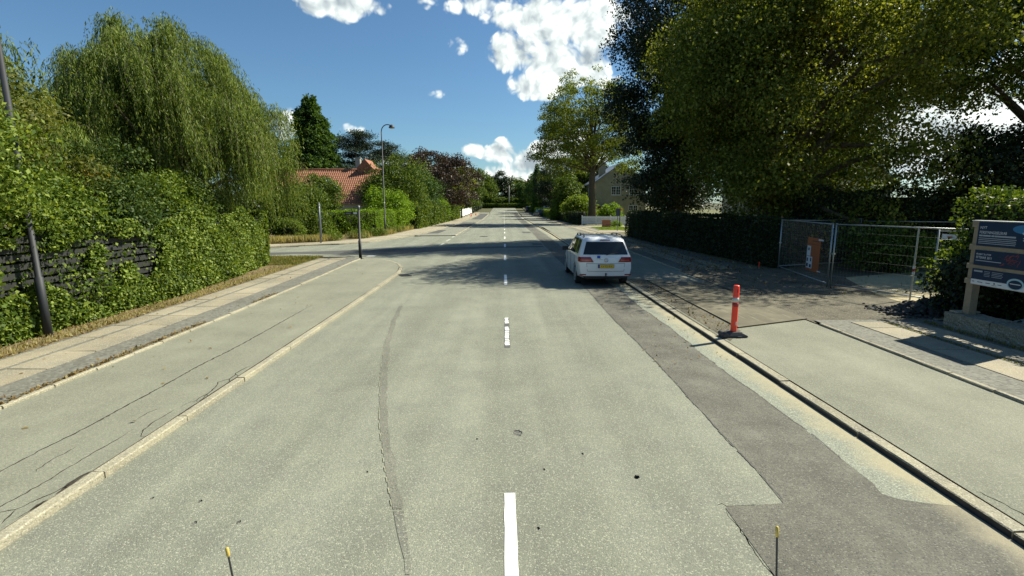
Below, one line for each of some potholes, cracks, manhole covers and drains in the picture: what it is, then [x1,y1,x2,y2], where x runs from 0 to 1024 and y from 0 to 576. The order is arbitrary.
crack [0,310,303,524]
